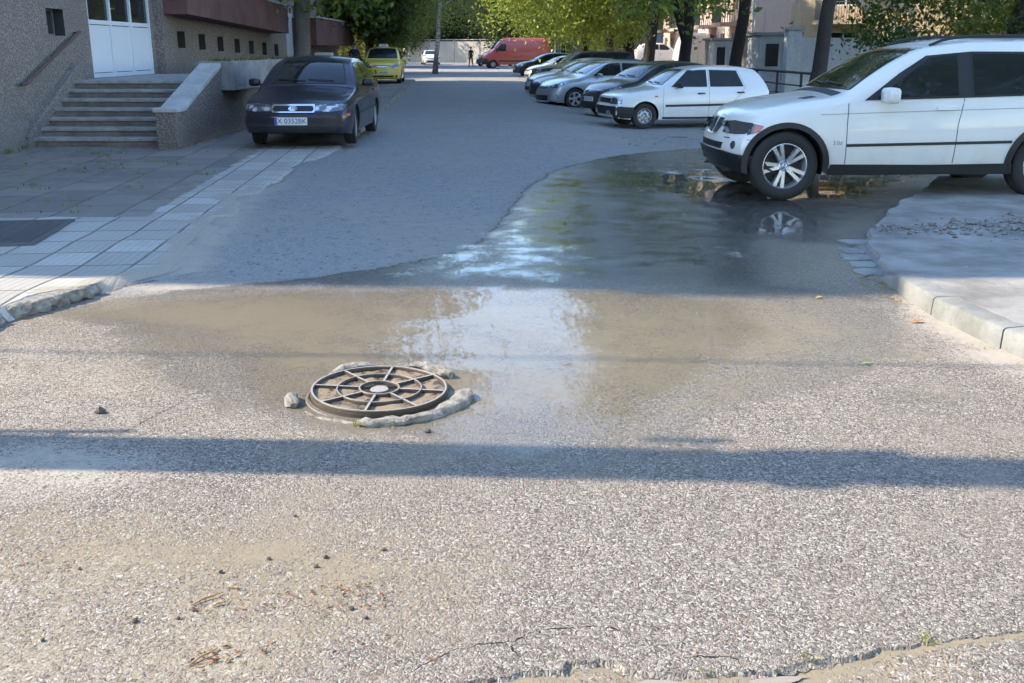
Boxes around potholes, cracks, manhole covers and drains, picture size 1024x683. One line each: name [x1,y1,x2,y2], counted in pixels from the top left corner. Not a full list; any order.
drain grate [0,219,75,247]
crack [403,625,631,676]
